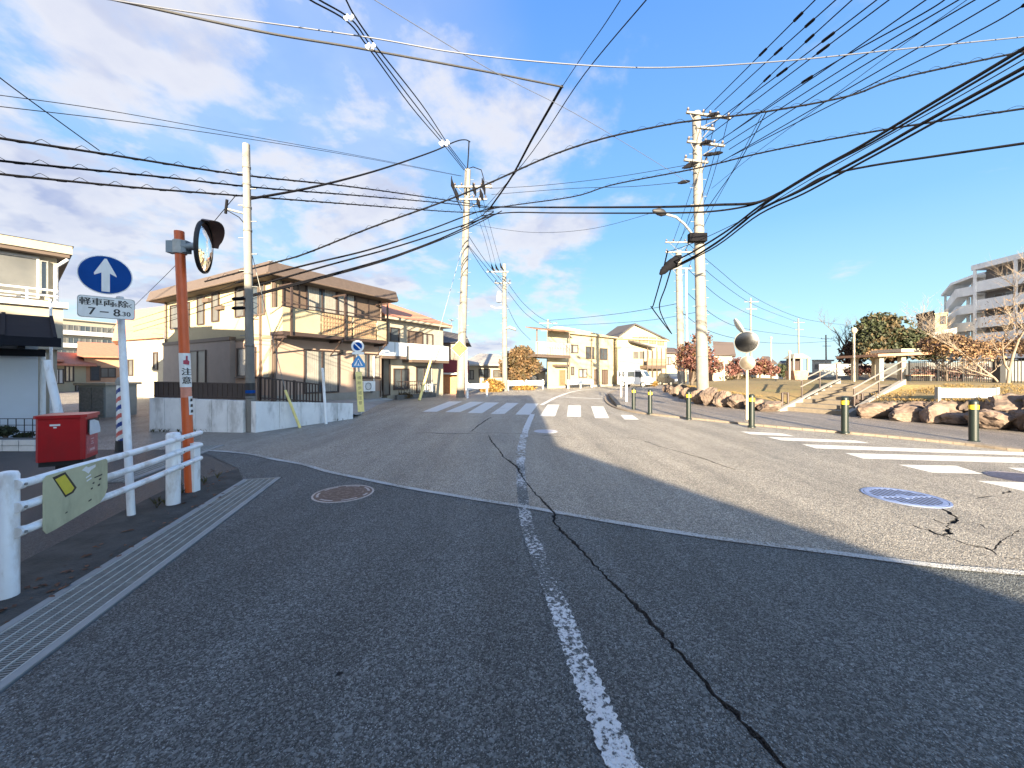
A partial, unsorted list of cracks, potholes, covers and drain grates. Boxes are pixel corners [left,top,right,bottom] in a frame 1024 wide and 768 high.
manhole cover [311,485,374,503]
drain grate [0,581,136,682]
manhole cover [861,487,953,508]
drain grate [161,499,247,534]
drain grate [213,478,276,502]
crack [911,491,1021,560]
drain grate [74,530,205,588]
crack [426,417,786,768]
